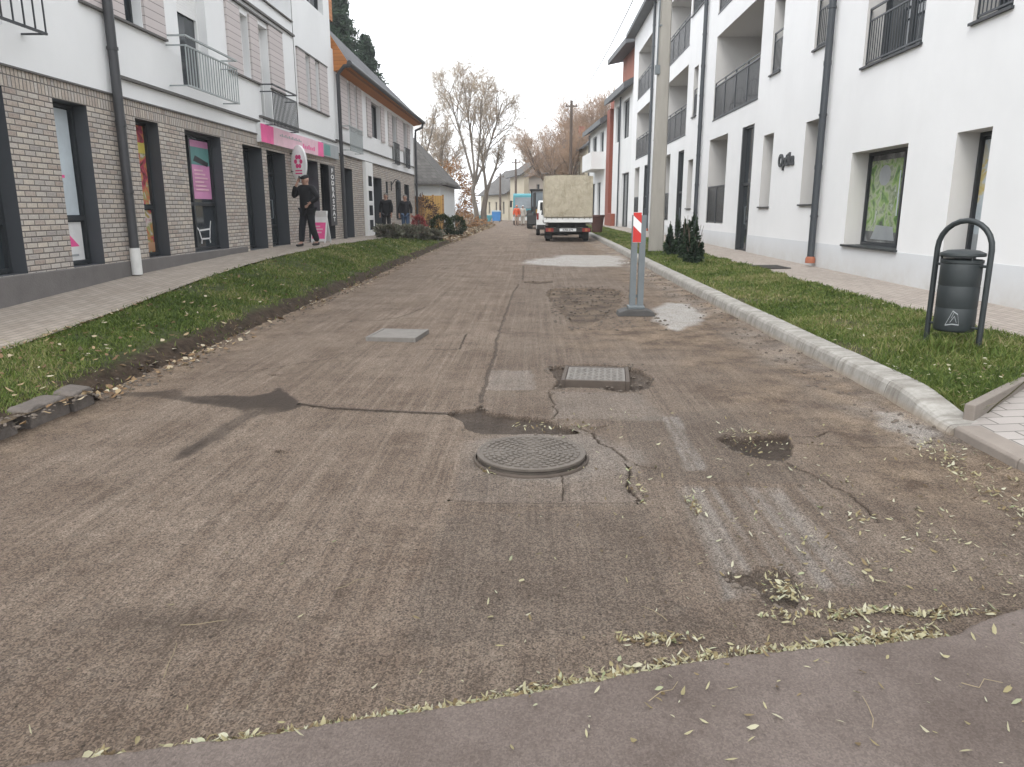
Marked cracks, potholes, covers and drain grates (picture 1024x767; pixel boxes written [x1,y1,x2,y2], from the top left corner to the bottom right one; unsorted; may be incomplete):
crack [449,390,661,507]
crack [351,266,526,406]
manhole cover [561,366,630,391]
pothole [536,287,629,330]
pothole [716,563,810,613]
crack [295,402,446,416]
pothole [711,432,800,463]
pothole [444,403,617,436]
manhole cover [366,328,429,342]
manhole cover [474,435,589,479]
crack [778,429,915,523]
